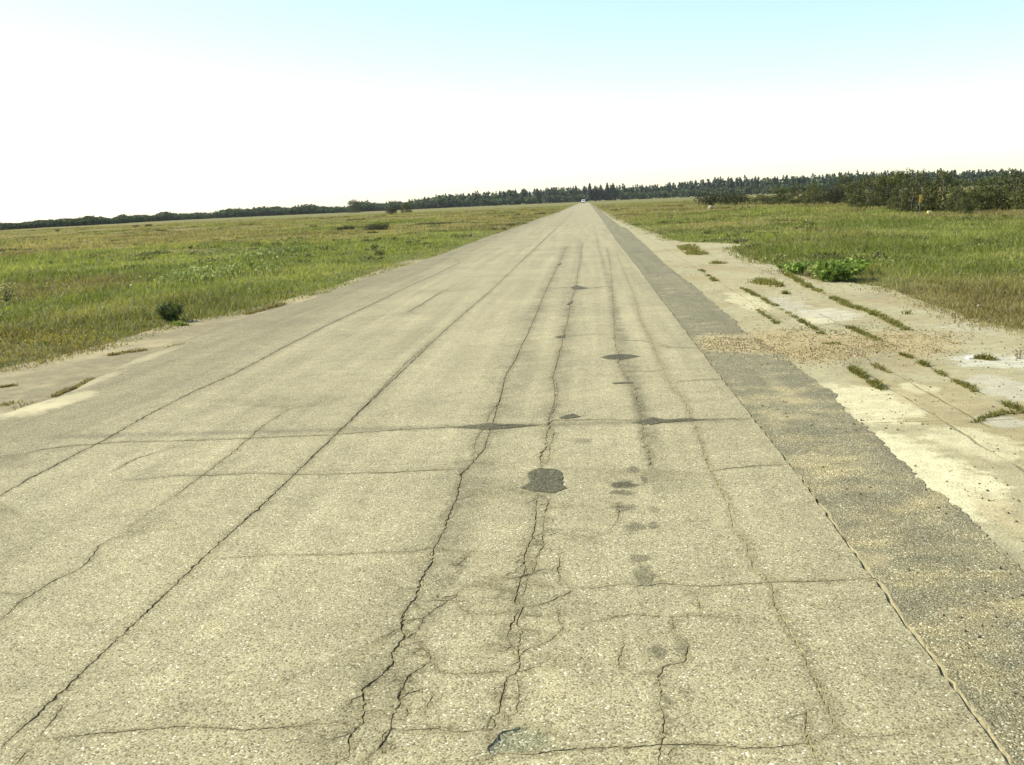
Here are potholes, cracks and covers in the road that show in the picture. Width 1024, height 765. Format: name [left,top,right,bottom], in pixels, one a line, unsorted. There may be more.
crack [0,542,106,620]
crack [119,243,583,765]
crack [490,248,918,765]
crack [15,704,312,765]
